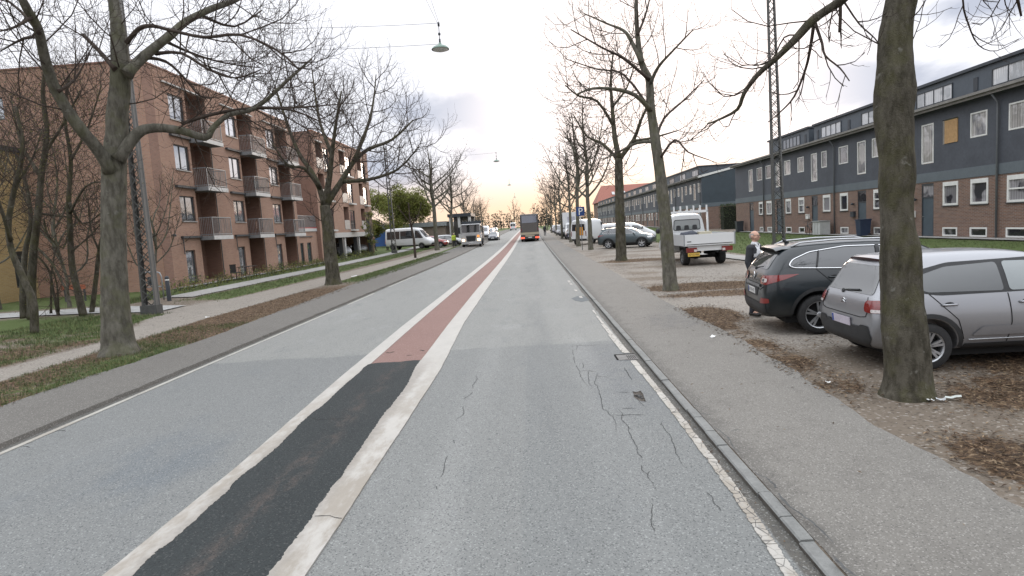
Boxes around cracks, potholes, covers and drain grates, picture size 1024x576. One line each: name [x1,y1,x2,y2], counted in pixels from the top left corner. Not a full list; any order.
crack [573,344,657,490]
